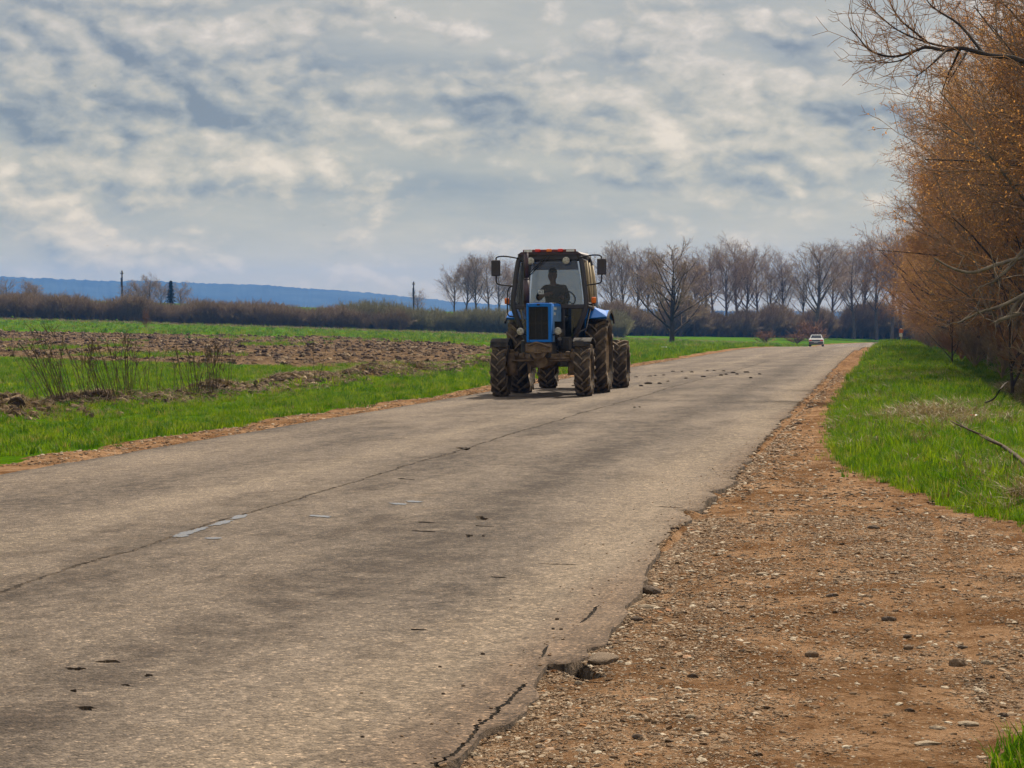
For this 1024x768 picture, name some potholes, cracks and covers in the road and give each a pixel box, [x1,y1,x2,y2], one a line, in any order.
pothole [563,665,613,683]
crack [580,606,598,623]
crack [432,683,527,768]
